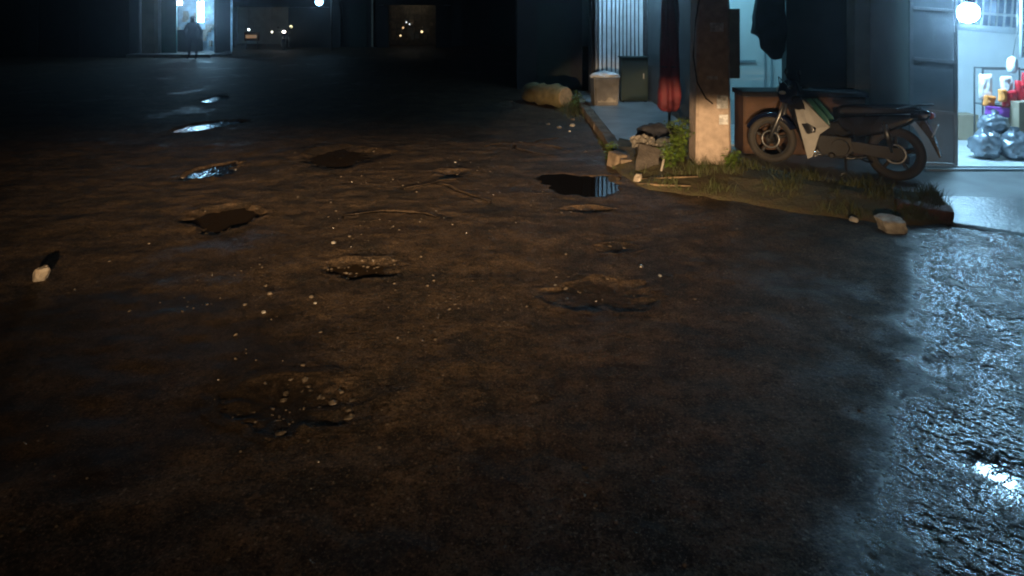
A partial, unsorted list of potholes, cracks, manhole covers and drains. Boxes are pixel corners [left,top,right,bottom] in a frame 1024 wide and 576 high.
pothole [523,171,636,202]
pothole [548,204,625,214]
pothole [427,167,477,179]
pothole [288,142,410,173]
pothole [310,254,417,283]
pothole [166,158,255,184]
pothole [192,94,236,104]
crack [344,178,495,220]
pothole [520,272,670,316]
pothole [199,366,390,444]
pothole [584,240,653,255]
pothole [165,199,278,238]
